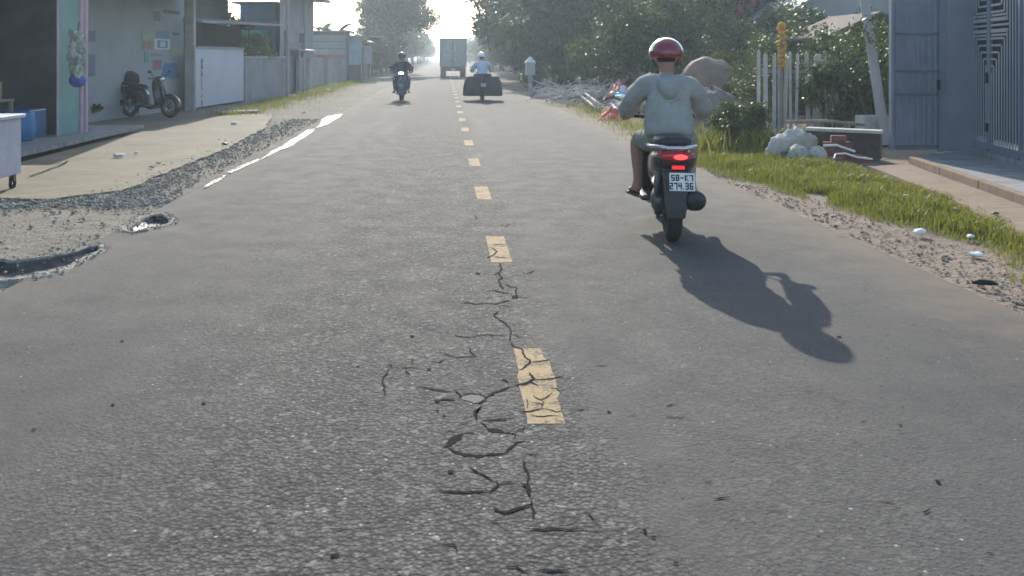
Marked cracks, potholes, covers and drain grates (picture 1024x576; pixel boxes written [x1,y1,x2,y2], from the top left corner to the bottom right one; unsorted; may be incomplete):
crack [381,244,583,432]
pothole [114,213,176,233]
pothole [0,244,106,287]
crack [436,453,597,530]
